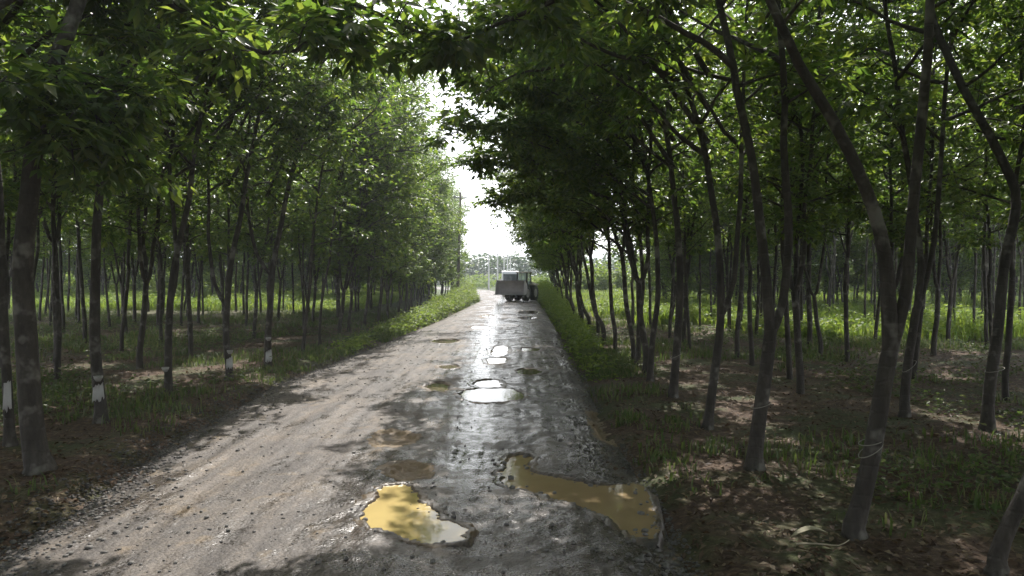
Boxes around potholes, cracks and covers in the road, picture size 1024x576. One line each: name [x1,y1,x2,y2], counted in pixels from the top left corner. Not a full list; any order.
pothole [366,428,422,448]
pothole [417,380,456,393]
pothole [510,367,549,376]
pothole [467,378,508,389]
pothole [491,450,668,552]
pothole [351,481,479,548]
pothole [482,357,512,365]
pothole [375,459,435,481]
pothole [453,387,532,404]
pothole [486,345,514,357]
